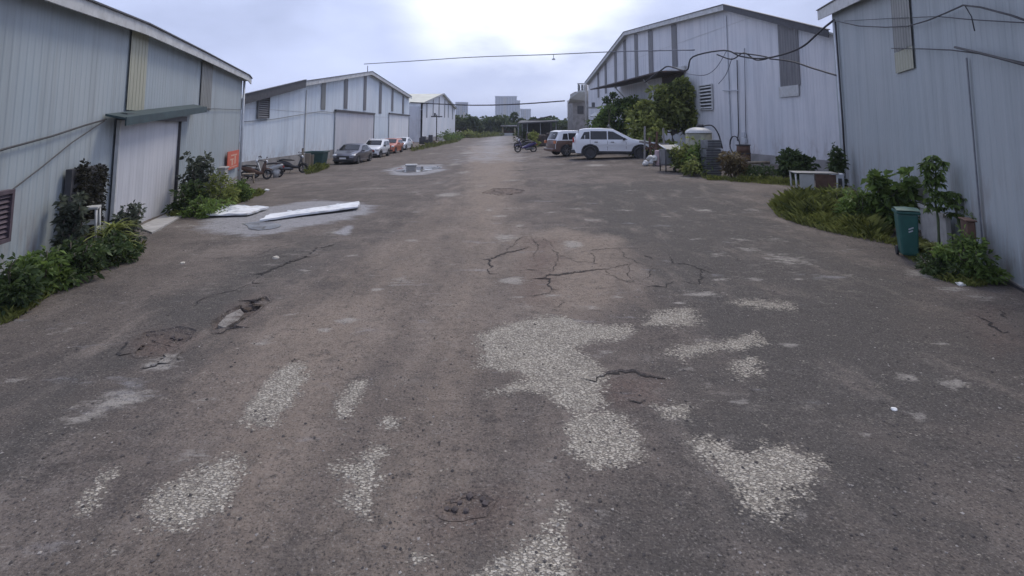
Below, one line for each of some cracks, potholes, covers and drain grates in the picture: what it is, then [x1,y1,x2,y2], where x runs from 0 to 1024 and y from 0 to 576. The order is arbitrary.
crack [196,243,335,333]
pothole [131,325,199,358]
crack [482,236,714,307]
pothole [437,489,499,521]
crack [580,365,666,403]
crack [975,310,1009,333]
pothole [208,296,272,334]
